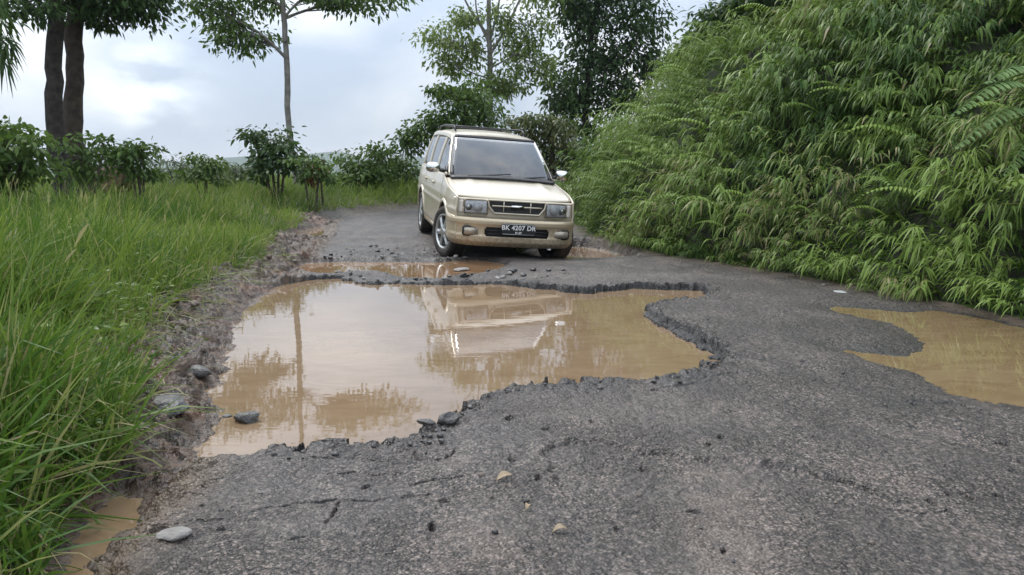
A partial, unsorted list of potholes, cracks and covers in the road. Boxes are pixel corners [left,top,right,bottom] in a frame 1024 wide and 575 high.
pothole [56,487,150,575]
pothole [827,305,1024,407]
pothole [298,259,506,278]
pothole [178,274,736,465]
crack [265,450,468,524]
